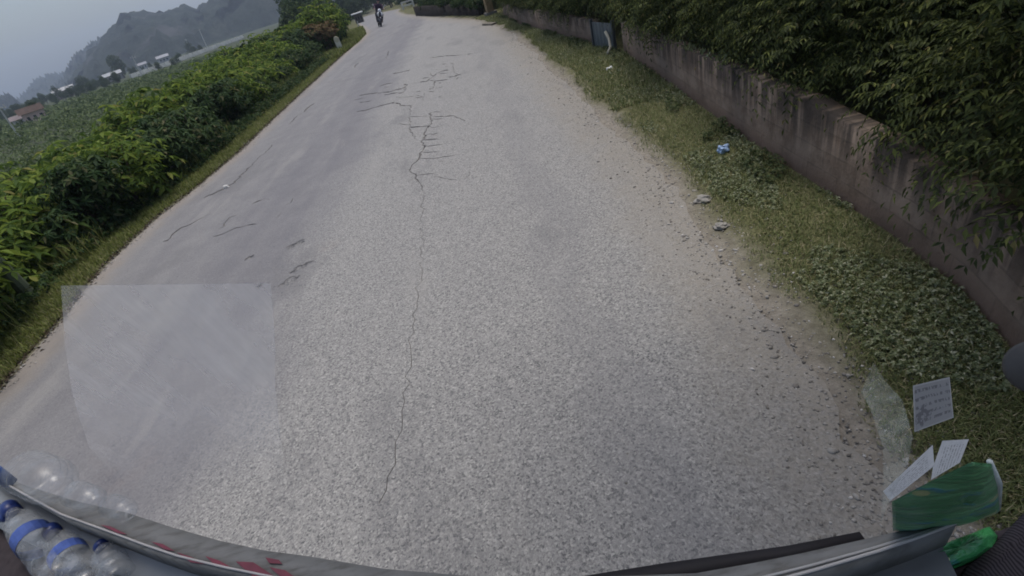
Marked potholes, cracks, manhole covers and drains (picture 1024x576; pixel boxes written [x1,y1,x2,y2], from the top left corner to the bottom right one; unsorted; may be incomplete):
crack [356,51,465,503]
crack [206,145,272,197]
